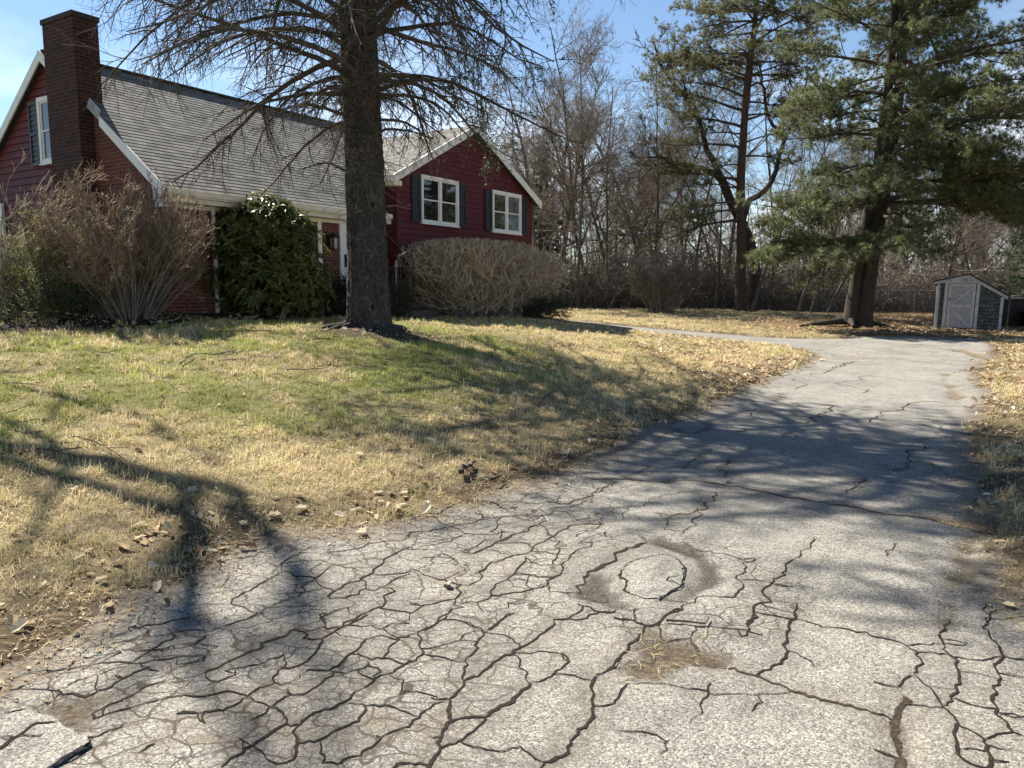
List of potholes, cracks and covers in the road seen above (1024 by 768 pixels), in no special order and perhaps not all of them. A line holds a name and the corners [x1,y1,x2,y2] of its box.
crack [0,417,1024,768]
